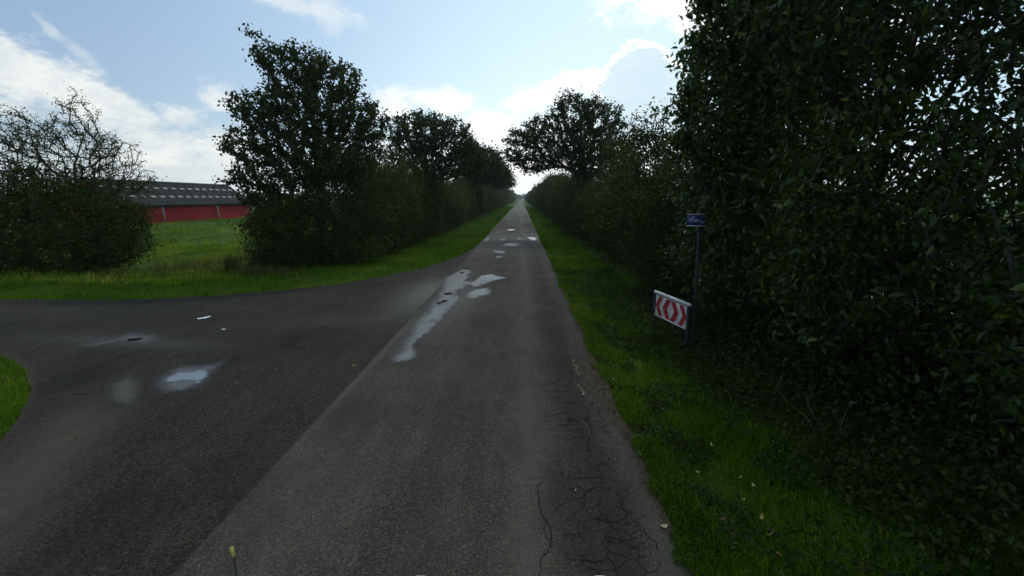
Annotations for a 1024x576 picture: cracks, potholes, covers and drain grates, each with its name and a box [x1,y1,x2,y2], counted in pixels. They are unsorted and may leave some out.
crack [537,471,658,576]
pothole [396,270,505,362]
crack [543,358,593,445]
